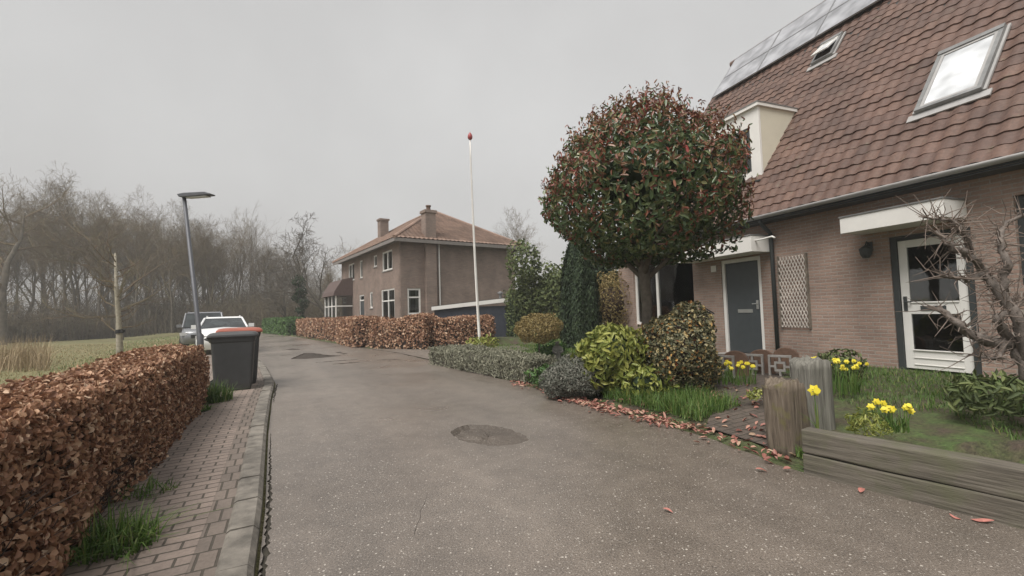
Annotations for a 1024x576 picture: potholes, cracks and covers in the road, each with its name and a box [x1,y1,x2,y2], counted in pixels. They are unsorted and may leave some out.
crack [260,434,273,576]
